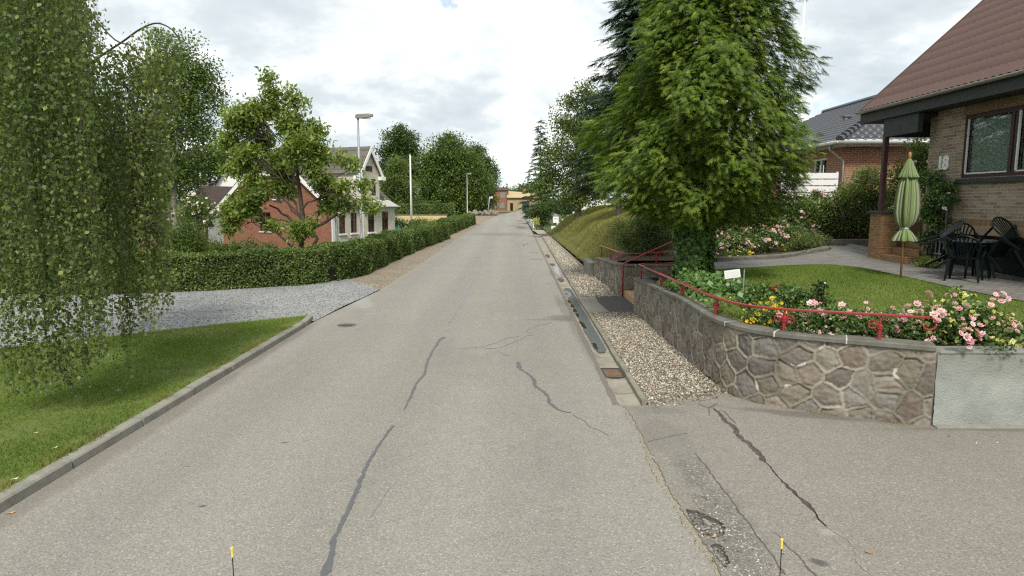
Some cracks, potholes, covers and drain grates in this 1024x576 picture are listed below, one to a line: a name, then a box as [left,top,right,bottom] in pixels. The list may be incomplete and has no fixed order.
crack [574,403,871,576]
pothole [710,543,731,568]
pothole [686,509,726,539]
drain grate [600,368,625,379]
